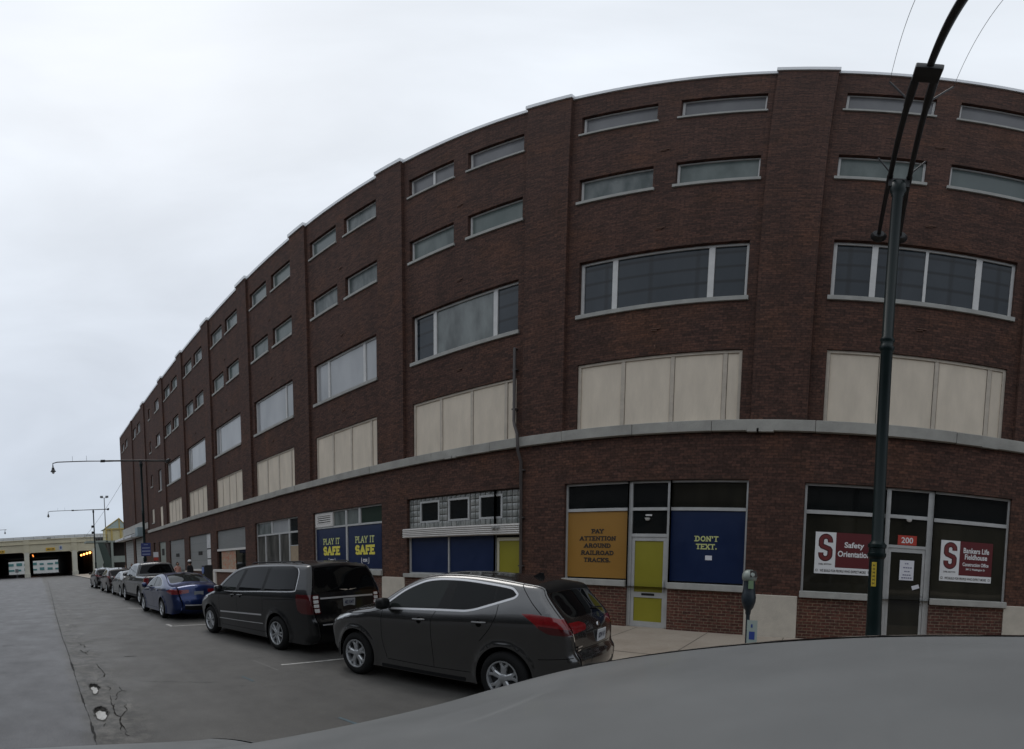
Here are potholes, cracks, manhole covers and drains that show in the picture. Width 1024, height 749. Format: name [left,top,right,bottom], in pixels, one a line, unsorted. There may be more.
crack [80,638,130,736]
pothole [93,706,110,721]
